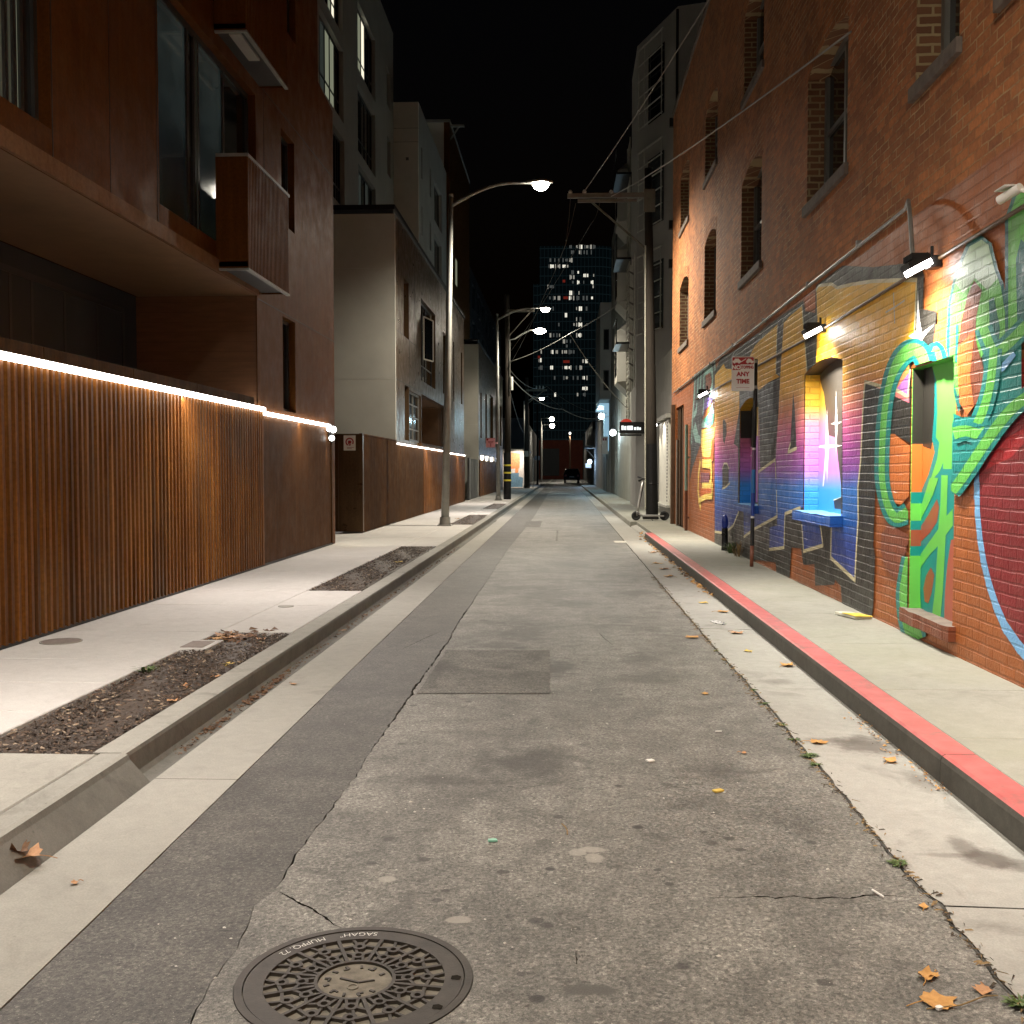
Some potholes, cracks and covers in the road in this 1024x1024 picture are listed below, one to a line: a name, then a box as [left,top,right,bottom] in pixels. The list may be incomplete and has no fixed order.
crack [280,892,339,927]
manhole cover [233,927,473,1024]
